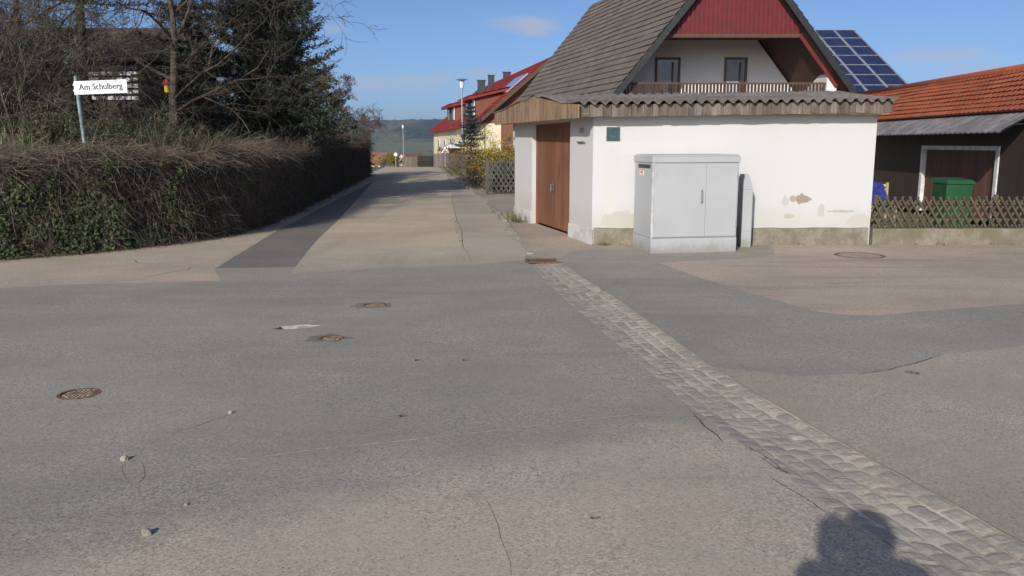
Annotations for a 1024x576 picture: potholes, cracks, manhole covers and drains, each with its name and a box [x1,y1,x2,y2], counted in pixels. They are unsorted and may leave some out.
manhole cover [56,388,101,400]
crack [693,413,722,441]
manhole cover [305,333,353,342]
crack [740,442,827,514]
crack [858,355,940,374]
crack [468,492,512,574]
crack [452,191,472,262]
